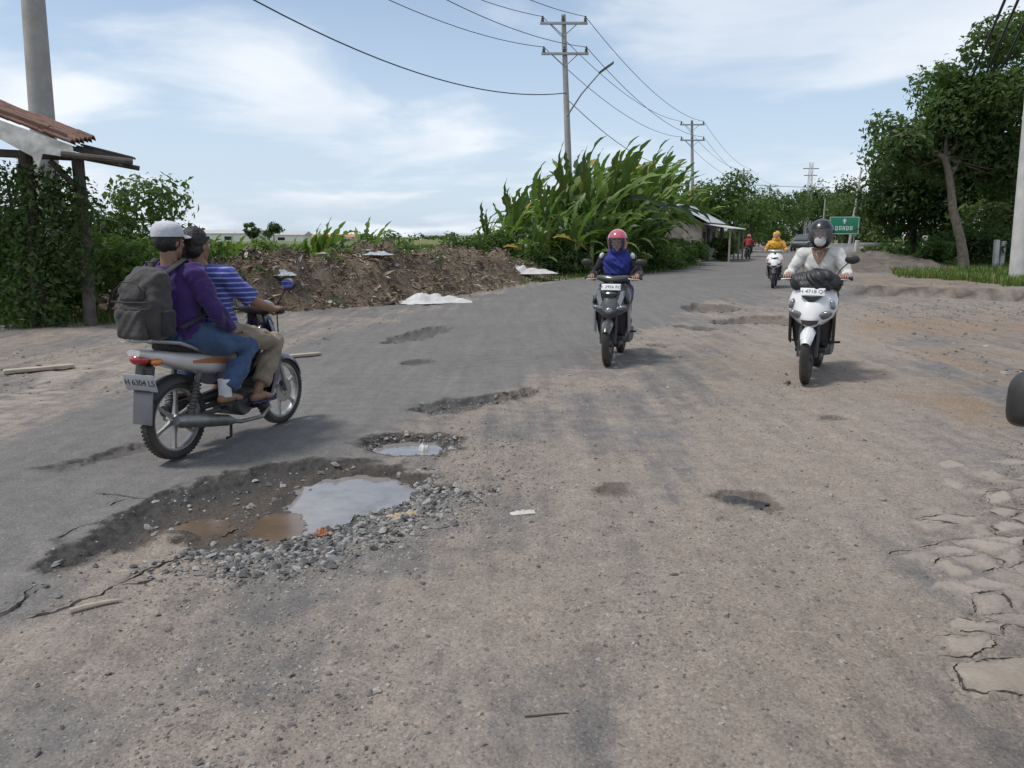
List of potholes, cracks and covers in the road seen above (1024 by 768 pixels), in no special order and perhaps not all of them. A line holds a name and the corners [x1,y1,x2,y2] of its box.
pothole [682,303,741,313]
pothole [346,431,467,457]
pothole [4,457,501,603]
pothole [711,315,789,326]
pothole [60,443,148,467]
pothole [593,482,636,496]
pothole [378,326,452,344]
pothole [406,387,540,417]
crack [884,486,1024,701]
pothole [707,489,784,514]
crack [0,492,195,622]
